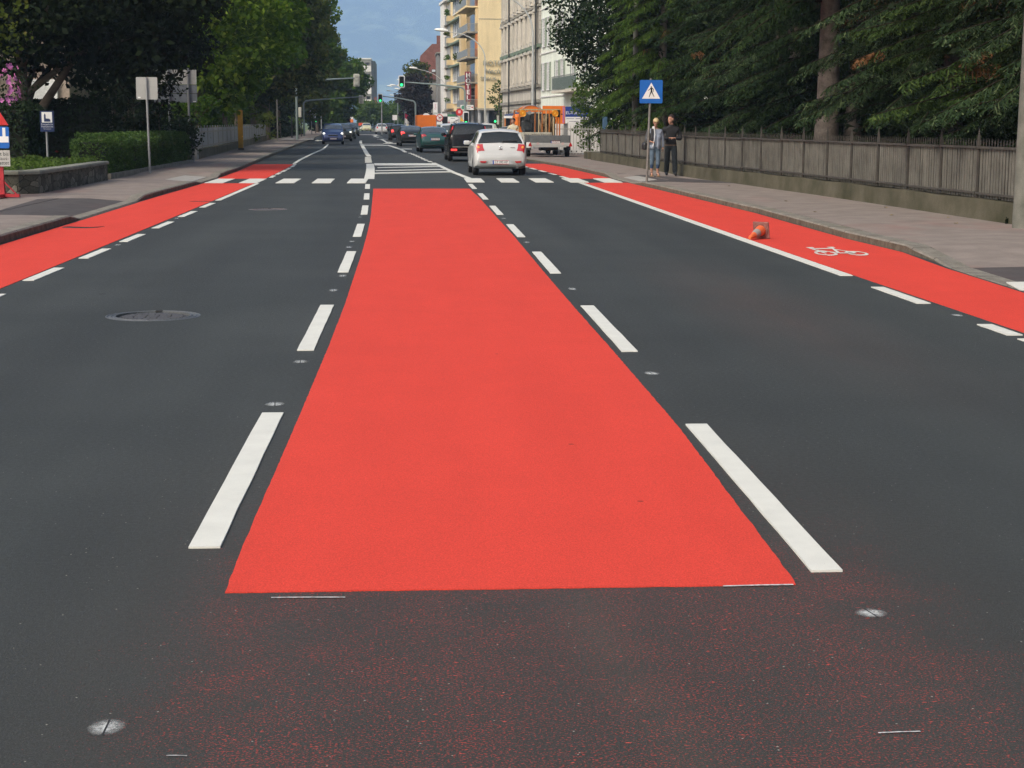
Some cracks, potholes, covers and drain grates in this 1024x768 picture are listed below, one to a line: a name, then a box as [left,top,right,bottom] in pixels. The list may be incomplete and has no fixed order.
manhole cover [105,310,201,321]
